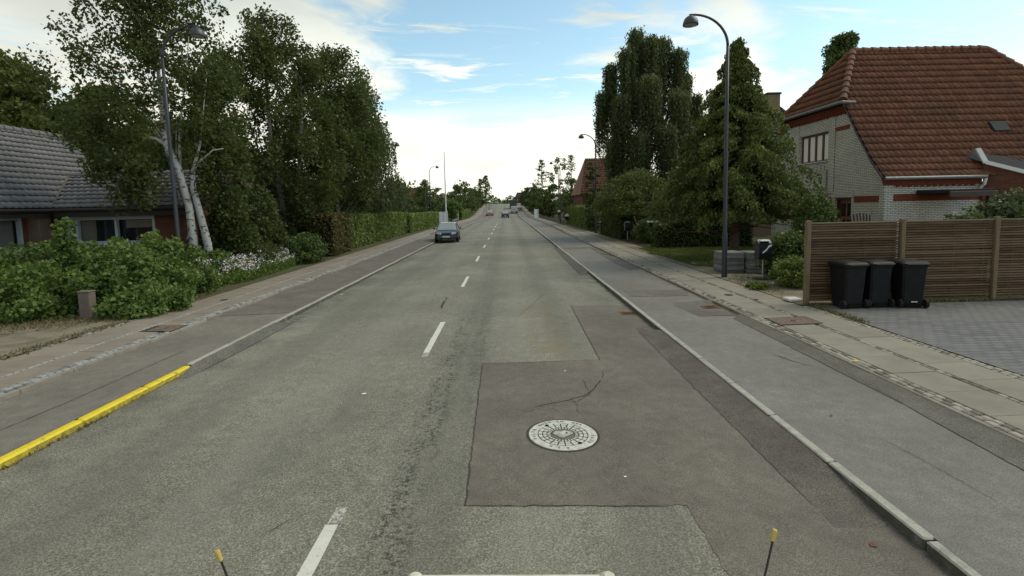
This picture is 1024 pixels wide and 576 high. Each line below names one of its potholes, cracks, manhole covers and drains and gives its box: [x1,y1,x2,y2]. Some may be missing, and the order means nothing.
manhole cover [526,419,600,452]
crack [523,375,604,412]
utility cover [765,316,822,325]
